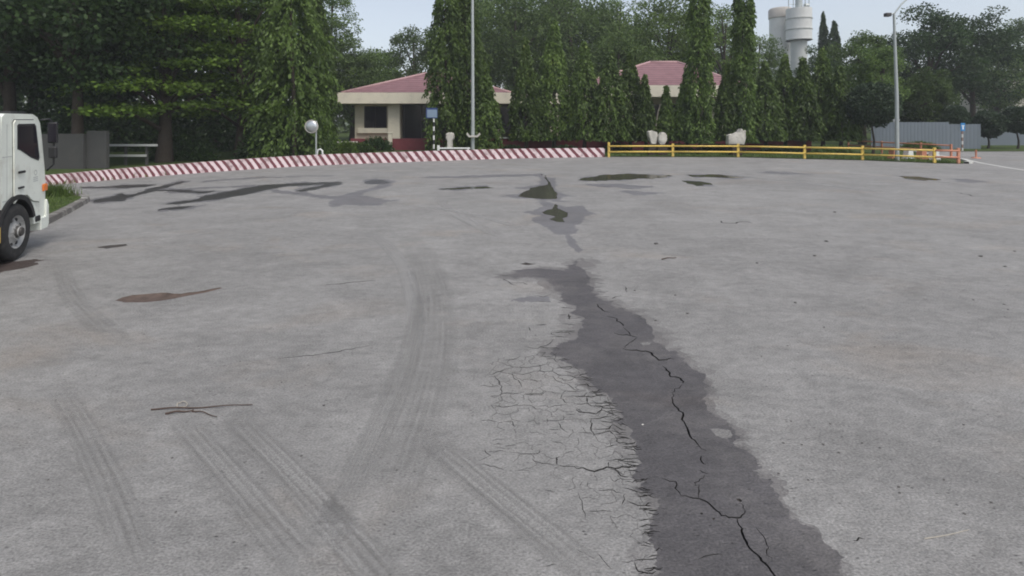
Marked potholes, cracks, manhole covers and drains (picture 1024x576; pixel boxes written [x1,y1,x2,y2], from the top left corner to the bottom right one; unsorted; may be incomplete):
crack [482,275,776,576]
